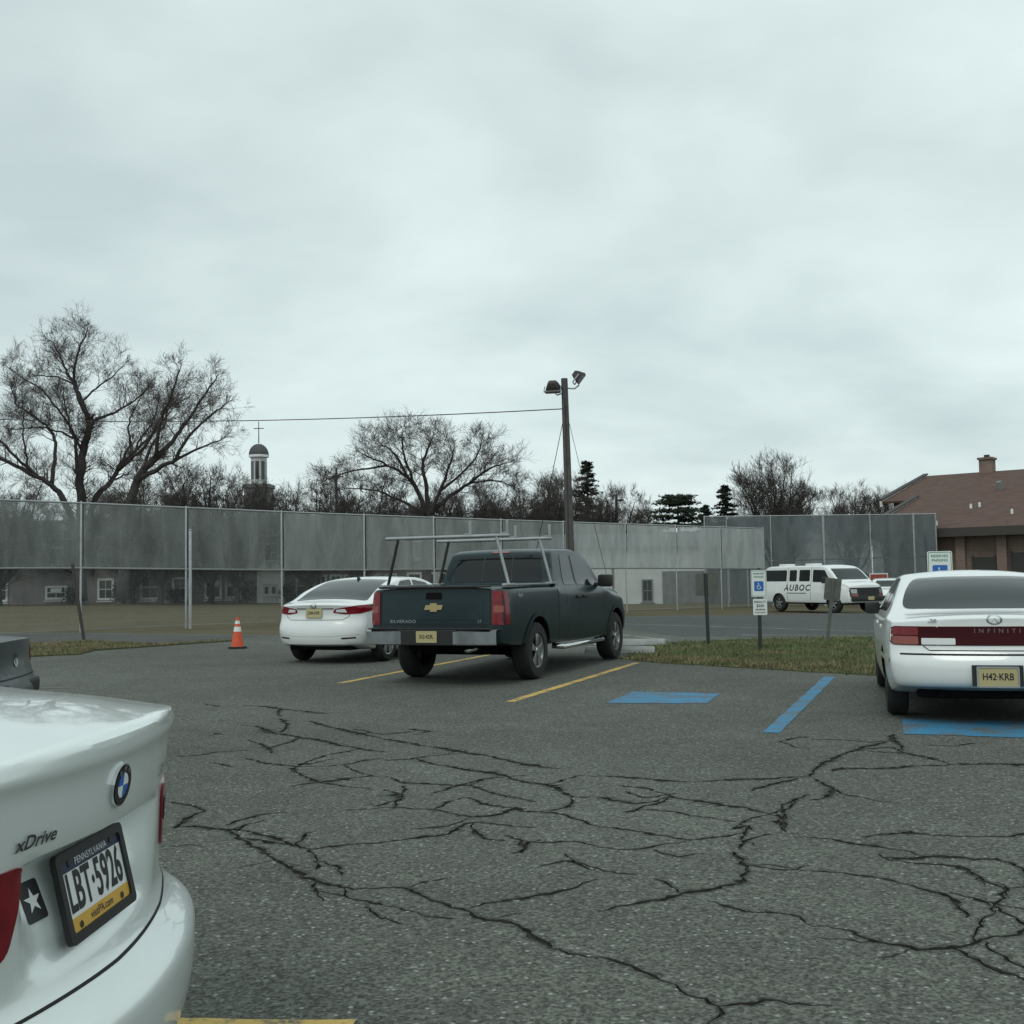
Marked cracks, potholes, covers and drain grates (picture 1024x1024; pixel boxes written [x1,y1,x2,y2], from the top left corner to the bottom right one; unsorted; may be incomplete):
crack [246,705,326,716]
crack [170,718,1024,1024]
